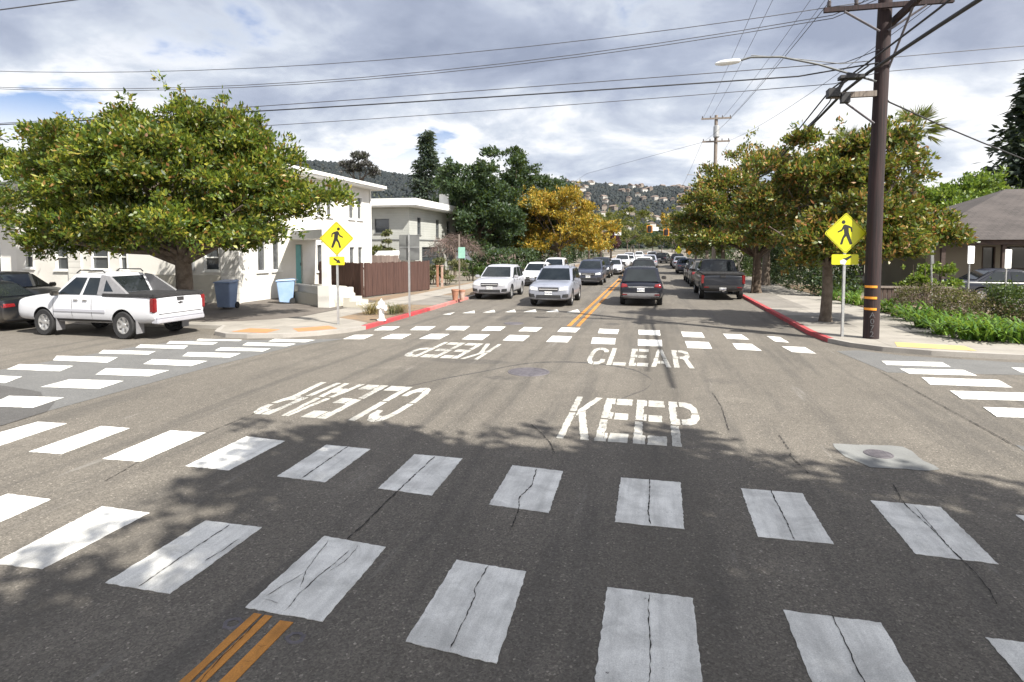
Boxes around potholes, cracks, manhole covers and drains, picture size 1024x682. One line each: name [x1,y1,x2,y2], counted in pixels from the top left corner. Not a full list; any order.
crack [451,565,489,646]
crack [139,525,235,586]
crack [832,615,865,682]
crack [893,484,997,604]
manhole cover [508,367,550,376]
crack [262,457,434,606]
crack [511,469,537,527]
manhole cover [863,449,894,459]
